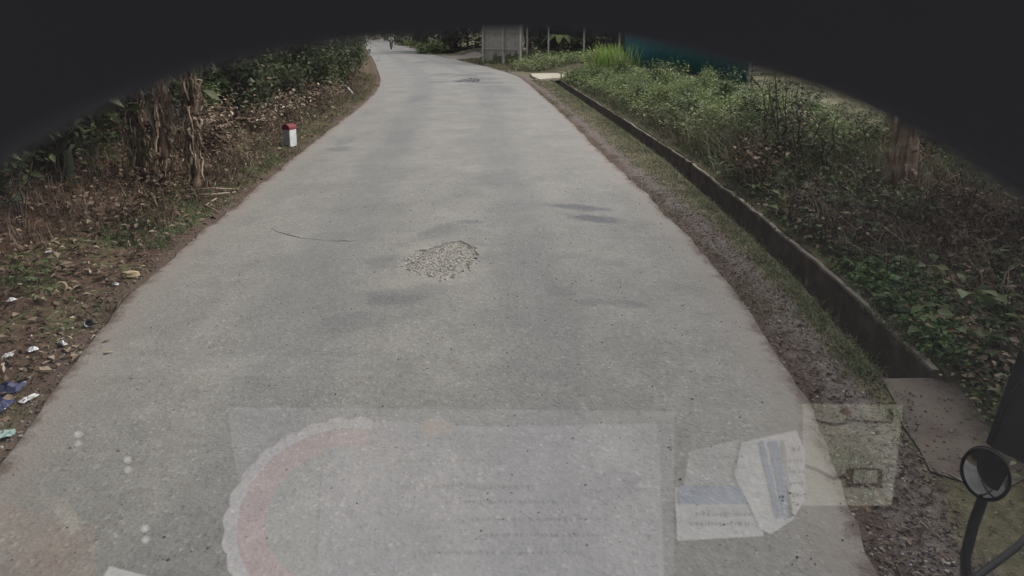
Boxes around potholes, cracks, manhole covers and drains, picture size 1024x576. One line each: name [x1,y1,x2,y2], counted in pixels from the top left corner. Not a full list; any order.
pothole [396,238,481,285]
